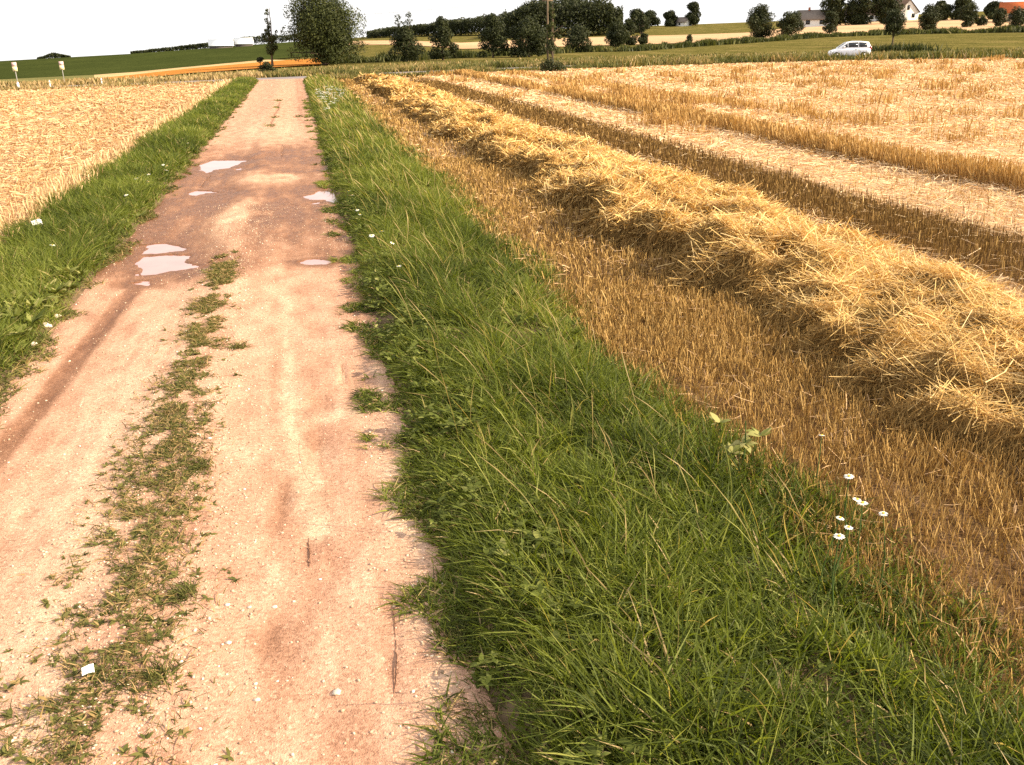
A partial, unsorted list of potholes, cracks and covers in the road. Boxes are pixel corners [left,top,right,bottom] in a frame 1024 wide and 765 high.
pothole [186,155,255,177]
pothole [114,233,233,284]
